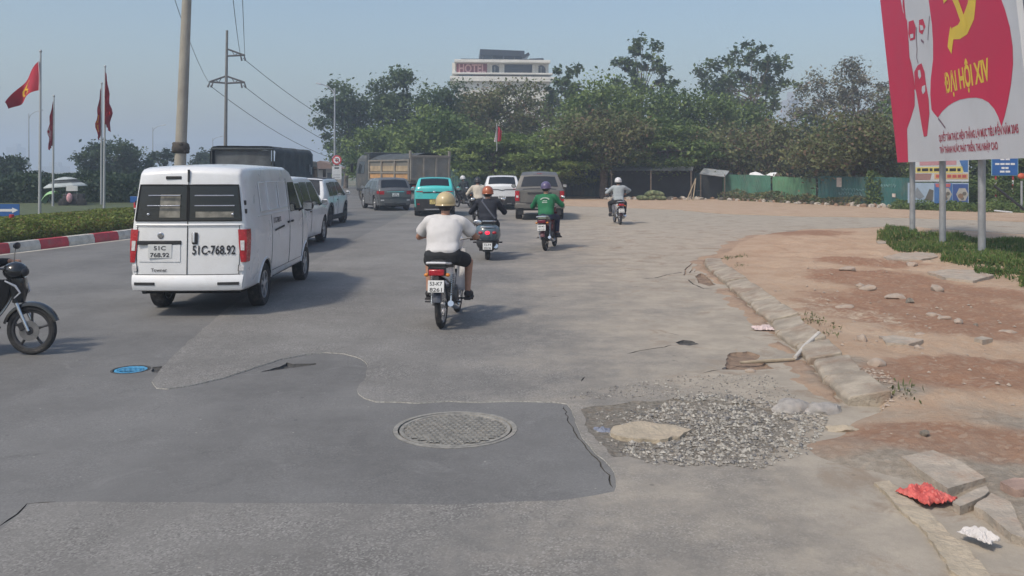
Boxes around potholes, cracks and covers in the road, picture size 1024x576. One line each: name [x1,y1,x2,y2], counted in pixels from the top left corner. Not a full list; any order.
pothole [722,351,774,370]
crack [0,502,47,526]
manhole cover [393,411,517,449]
pothole [581,399,795,462]
manhole cover [110,365,151,374]
